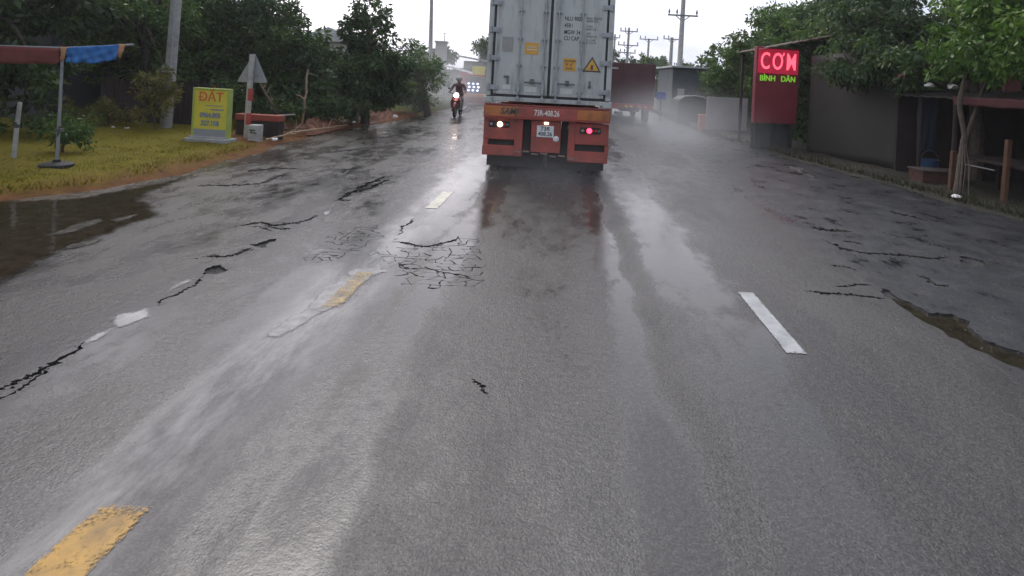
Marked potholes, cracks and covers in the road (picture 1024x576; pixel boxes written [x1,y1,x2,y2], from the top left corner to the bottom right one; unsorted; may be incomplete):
pothole [881,288,1024,356]
crack [235,215,318,231]
pothole [202,265,228,274]
crack [327,135,402,201]
crack [472,379,489,394]
crack [300,219,486,289]
crack [809,226,949,299]
